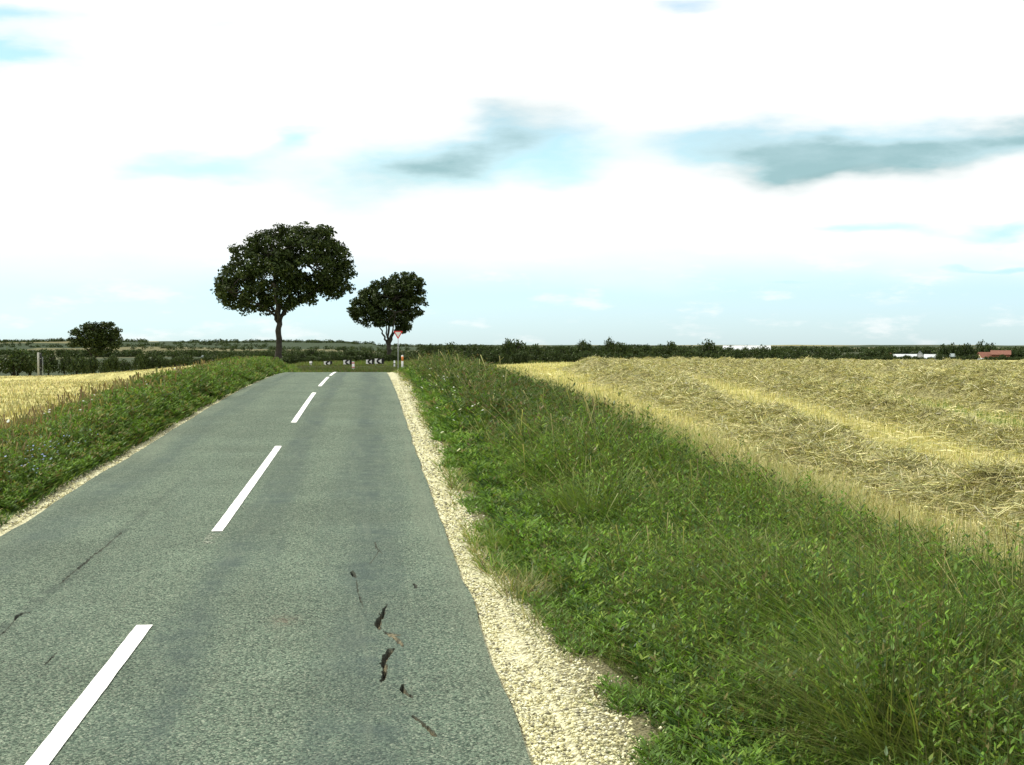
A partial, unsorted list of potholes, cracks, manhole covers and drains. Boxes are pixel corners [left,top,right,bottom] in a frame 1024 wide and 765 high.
crack [411,715,437,737]
crack [383,631,404,648]
crack [0,612,30,635]
crack [356,542,383,607]
